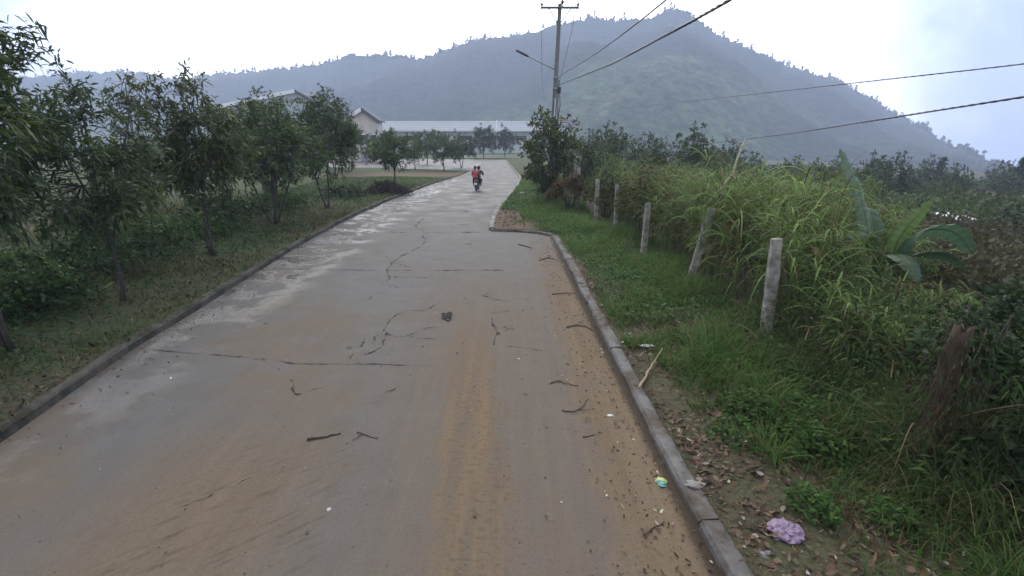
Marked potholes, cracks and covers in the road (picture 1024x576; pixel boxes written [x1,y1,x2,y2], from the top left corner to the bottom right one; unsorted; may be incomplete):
crack [482,290,544,351]
crack [347,301,441,359]
crack [369,219,439,299]
